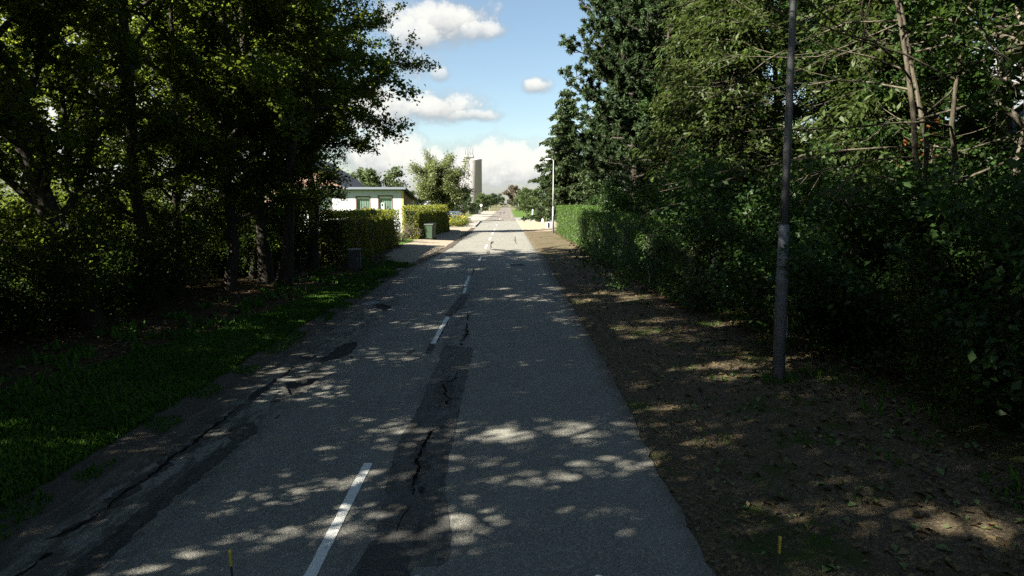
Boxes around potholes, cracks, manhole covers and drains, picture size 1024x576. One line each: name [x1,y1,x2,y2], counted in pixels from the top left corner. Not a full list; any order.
pothole [318,341,358,362]
crack [396,427,439,532]
crack [429,371,458,408]
crack [15,409,237,576]
